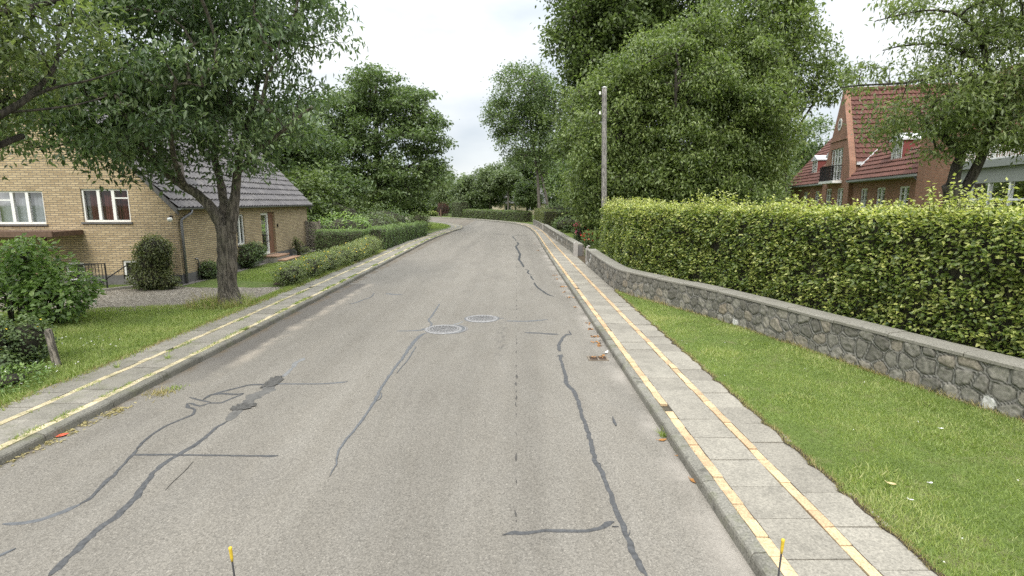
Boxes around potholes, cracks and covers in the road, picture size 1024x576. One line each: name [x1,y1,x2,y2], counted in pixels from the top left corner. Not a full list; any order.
manhole cover [424,325,468,334]
manhole cover [464,315,499,323]
